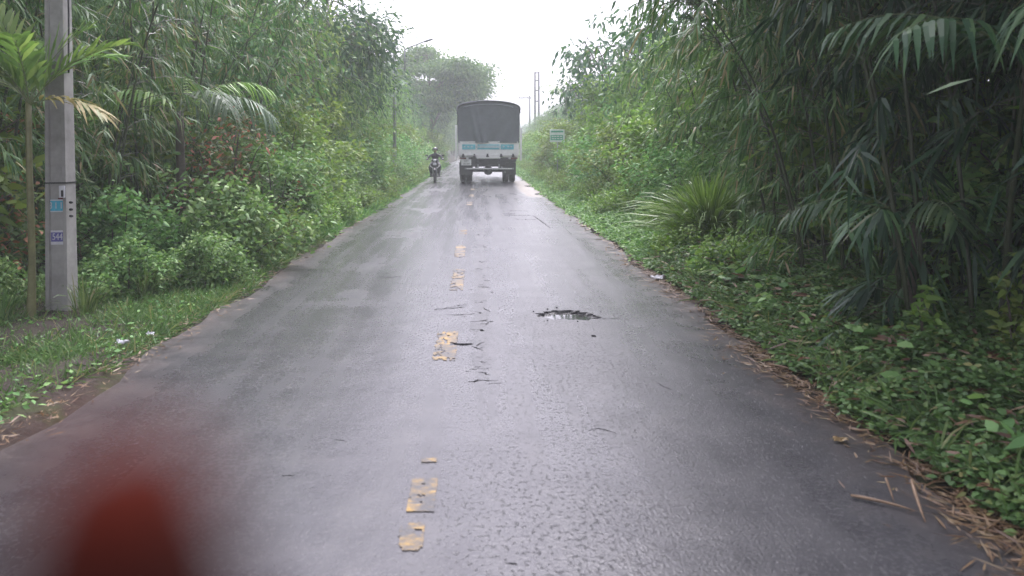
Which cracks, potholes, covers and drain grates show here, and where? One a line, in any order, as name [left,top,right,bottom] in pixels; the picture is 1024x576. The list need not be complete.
pothole [533,307,602,322]
